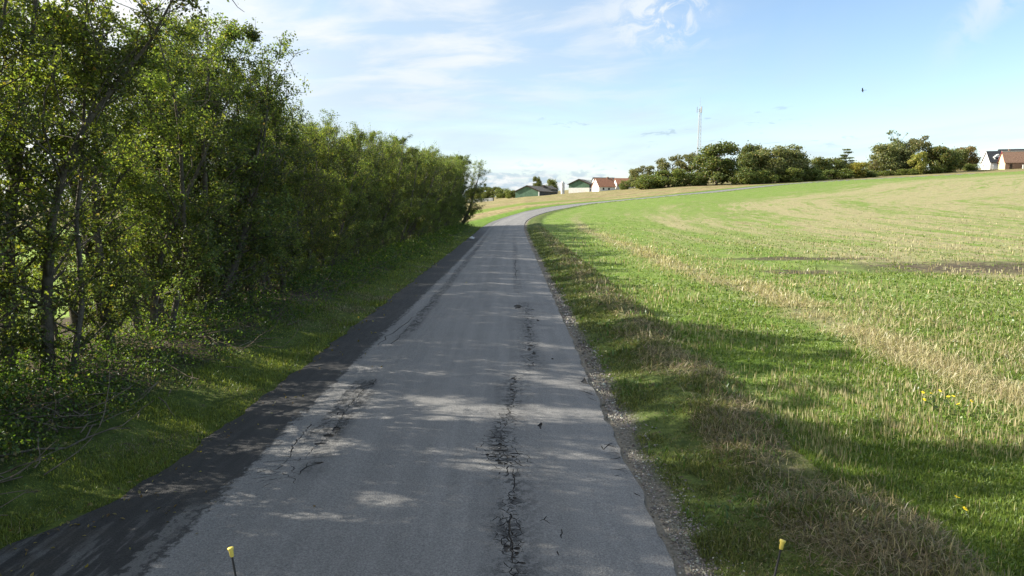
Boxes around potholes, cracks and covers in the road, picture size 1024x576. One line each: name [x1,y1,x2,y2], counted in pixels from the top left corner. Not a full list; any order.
crack [476,262,563,576]
crack [250,379,376,488]
